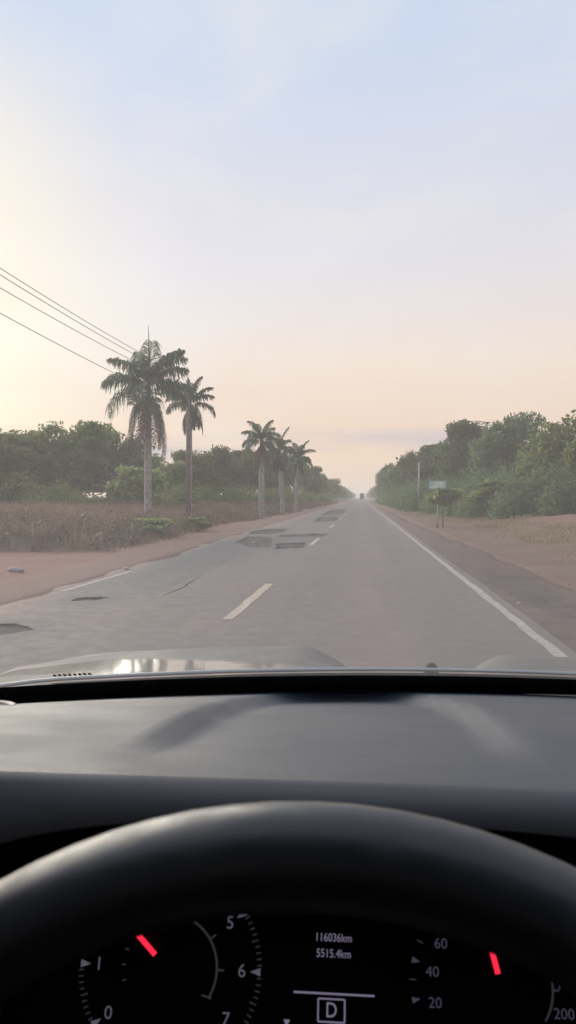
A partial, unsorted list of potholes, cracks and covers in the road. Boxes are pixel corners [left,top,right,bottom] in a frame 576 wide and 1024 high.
pothole [0,623,33,635]
pothole [234,537,272,547]
